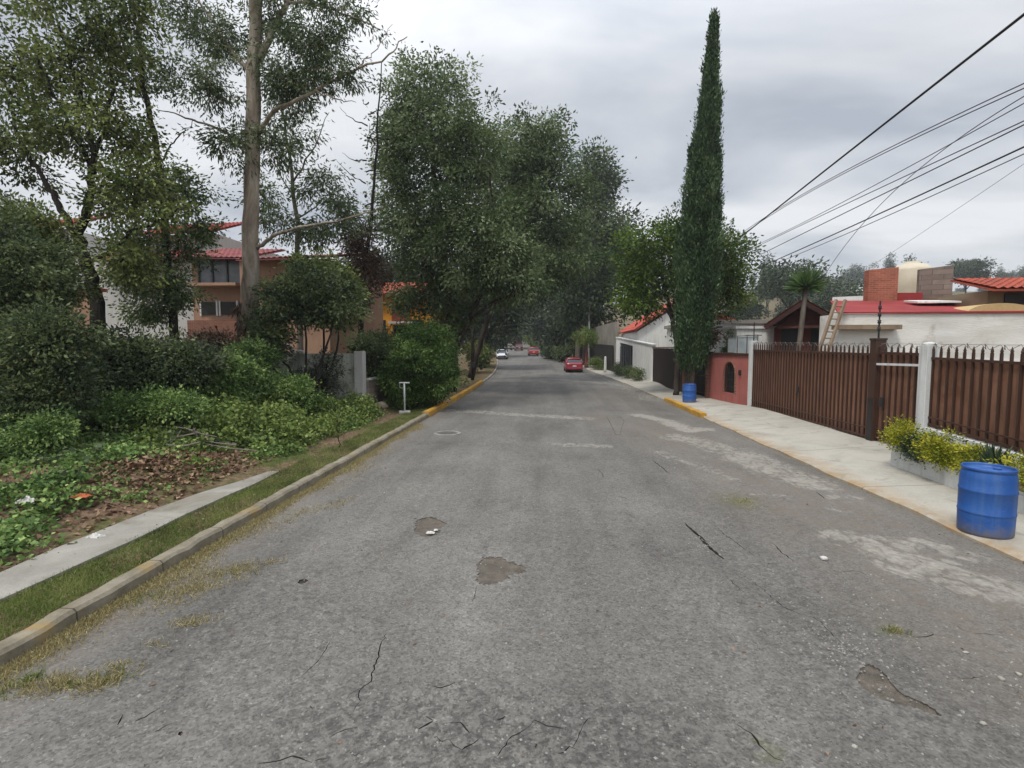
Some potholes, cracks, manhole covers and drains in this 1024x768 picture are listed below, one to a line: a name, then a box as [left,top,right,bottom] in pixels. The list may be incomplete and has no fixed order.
pothole [476,556,528,585]
pothole [414,517,447,537]
crack [329,633,387,738]
crack [418,714,589,755]
crack [684,523,851,652]
pothole [856,664,942,716]
crack [737,724,782,761]
